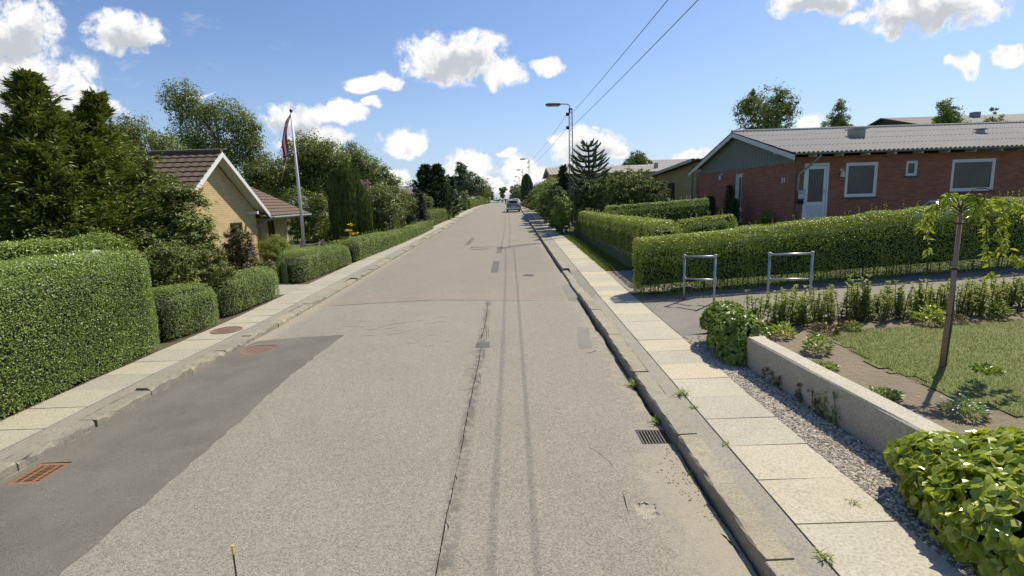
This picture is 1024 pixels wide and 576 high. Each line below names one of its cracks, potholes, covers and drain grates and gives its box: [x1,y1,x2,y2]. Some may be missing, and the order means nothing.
drain grate [635,430,673,444]
drain grate [6,463,70,485]
pothole [633,501,661,519]
manhole cover [240,344,278,355]
manhole cover [210,326,243,334]
